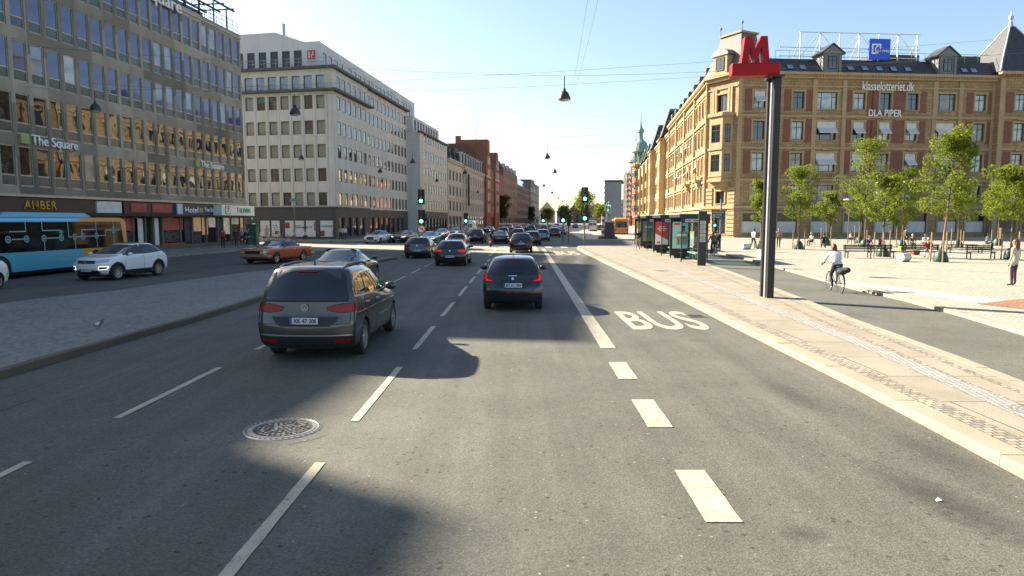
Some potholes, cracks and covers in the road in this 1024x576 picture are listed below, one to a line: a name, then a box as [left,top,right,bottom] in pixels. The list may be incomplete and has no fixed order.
manhole cover [243,417,323,440]
